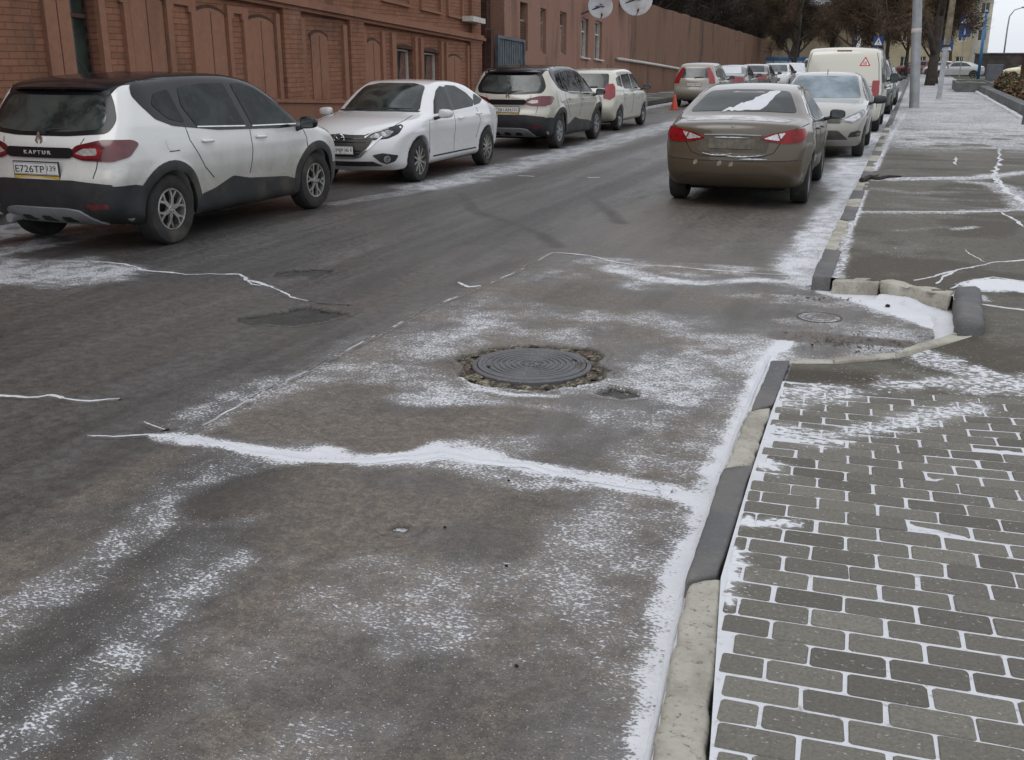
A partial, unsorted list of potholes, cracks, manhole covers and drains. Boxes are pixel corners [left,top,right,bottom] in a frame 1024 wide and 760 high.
pothole [585,382,650,402]
manhole cover [472,348,591,387]
manhole cover [796,312,843,323]
pothole [265,267,340,279]
crack [0,252,796,495]
crack [914,250,1024,311]
crack [861,149,1024,227]
pothole [227,304,356,328]
